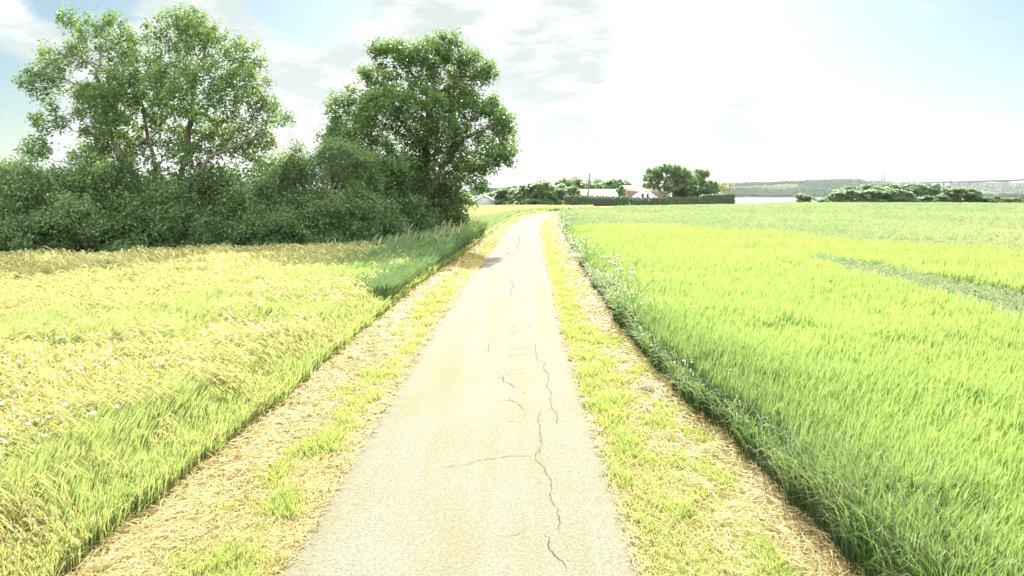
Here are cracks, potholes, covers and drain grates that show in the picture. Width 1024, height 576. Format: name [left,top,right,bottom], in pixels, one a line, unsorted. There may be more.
crack [441,313,567,570]
